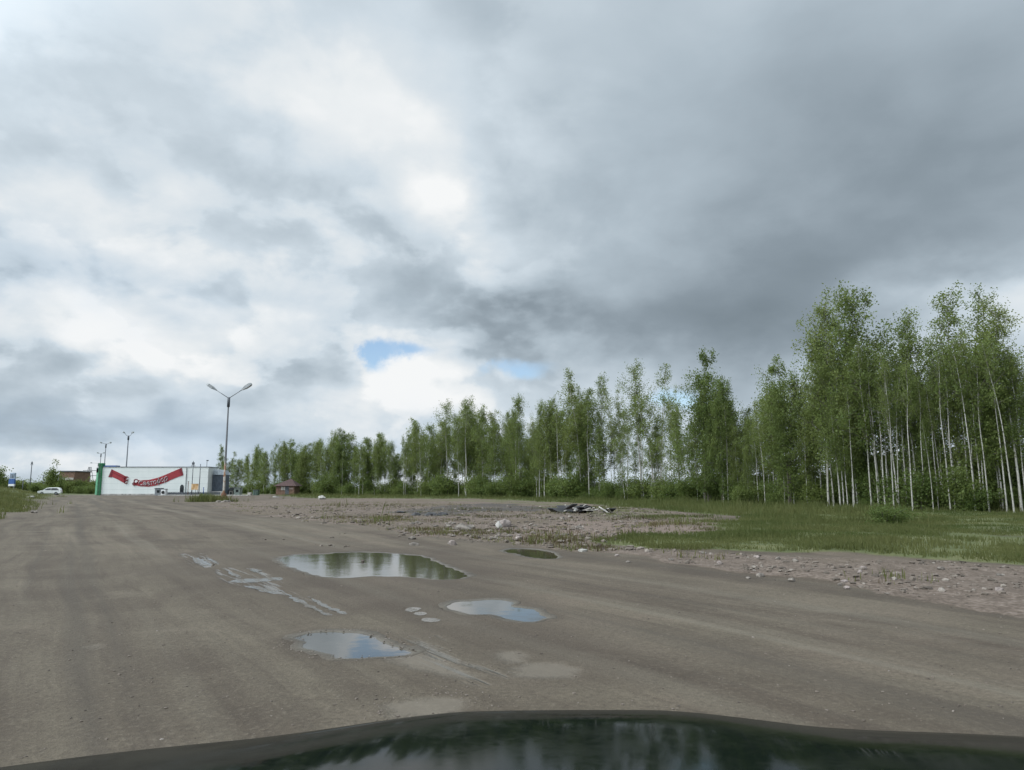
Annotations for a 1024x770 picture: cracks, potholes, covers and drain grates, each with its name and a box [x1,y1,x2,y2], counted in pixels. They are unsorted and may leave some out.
pothole [282,629,427,660]
pothole [272,551,477,580]
pothole [438,598,557,623]
pothole [498,548,563,559]
